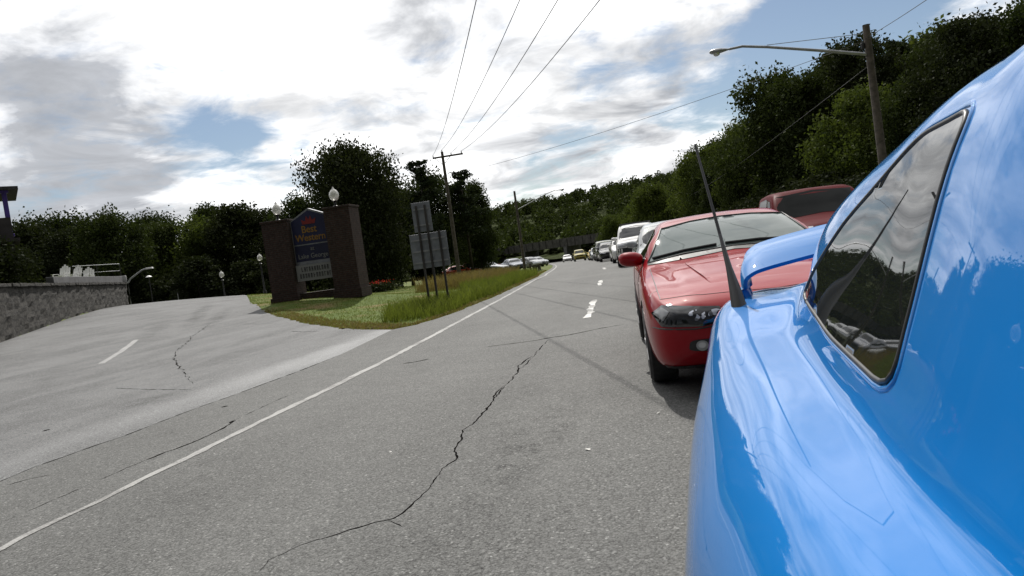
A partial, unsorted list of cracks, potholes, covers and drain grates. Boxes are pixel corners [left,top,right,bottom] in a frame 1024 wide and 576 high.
crack [264,325,617,566]
crack [121,324,210,390]
crack [6,397,284,521]
